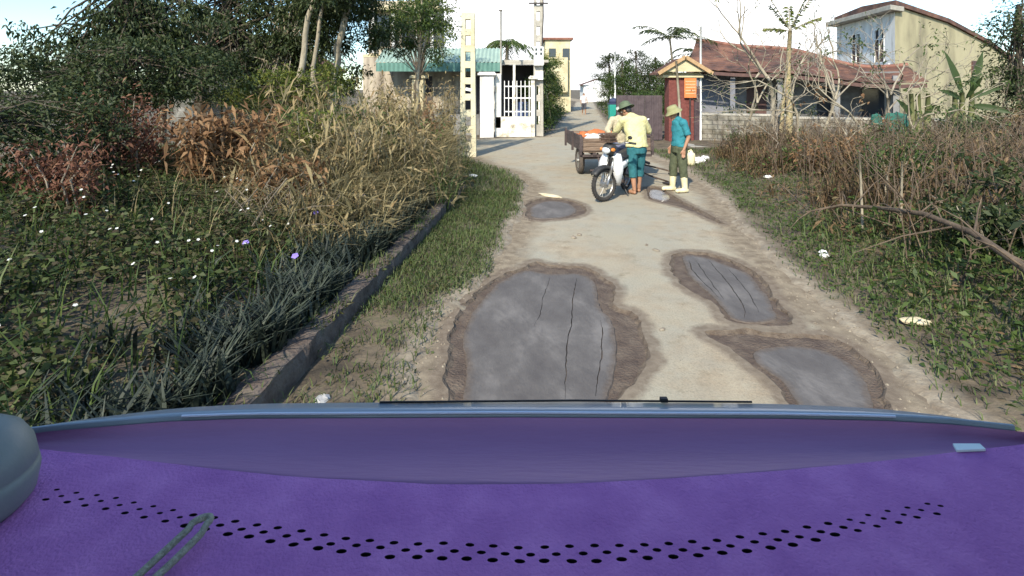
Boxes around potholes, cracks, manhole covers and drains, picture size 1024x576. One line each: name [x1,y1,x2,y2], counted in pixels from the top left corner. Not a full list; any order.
crack [595,325,603,396]
crack [564,280,577,399]
crack [689,262,759,316]
